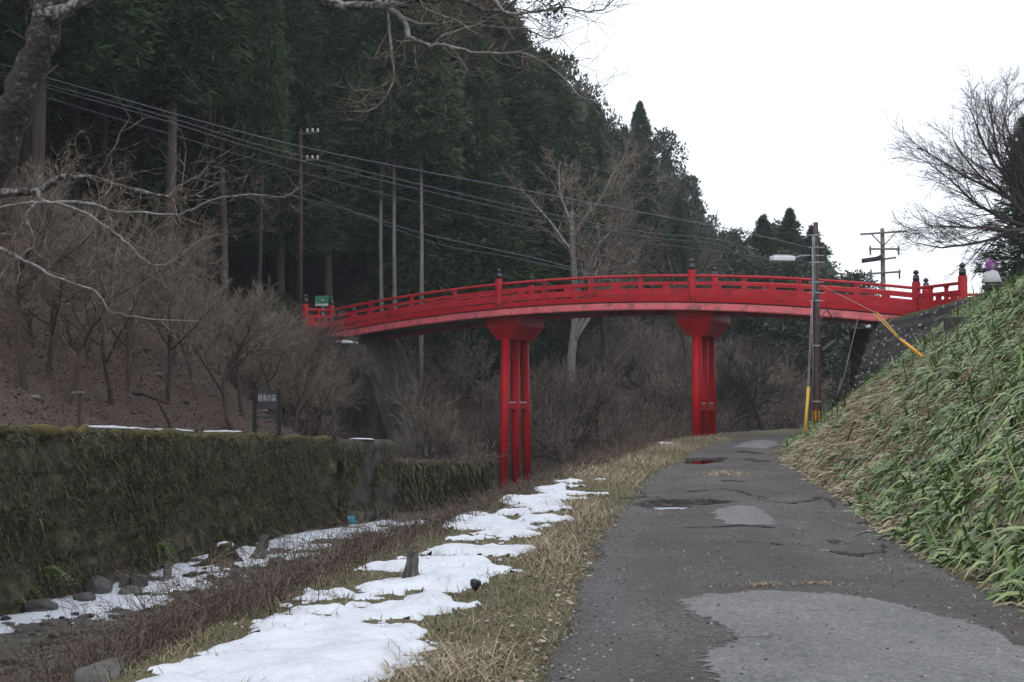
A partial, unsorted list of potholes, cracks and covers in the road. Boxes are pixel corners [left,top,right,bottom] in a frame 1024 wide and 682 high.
pothole [633,498,737,510]
crack [720,480,836,507]
